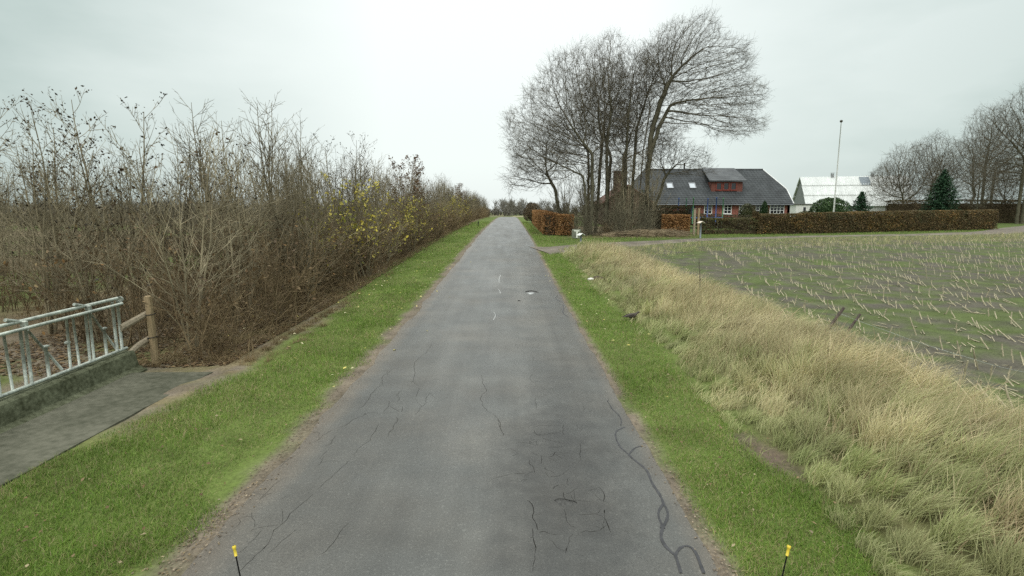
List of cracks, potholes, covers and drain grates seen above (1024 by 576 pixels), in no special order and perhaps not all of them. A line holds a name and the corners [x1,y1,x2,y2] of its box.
crack [497,407,611,565]
crack [233,359,434,571]
